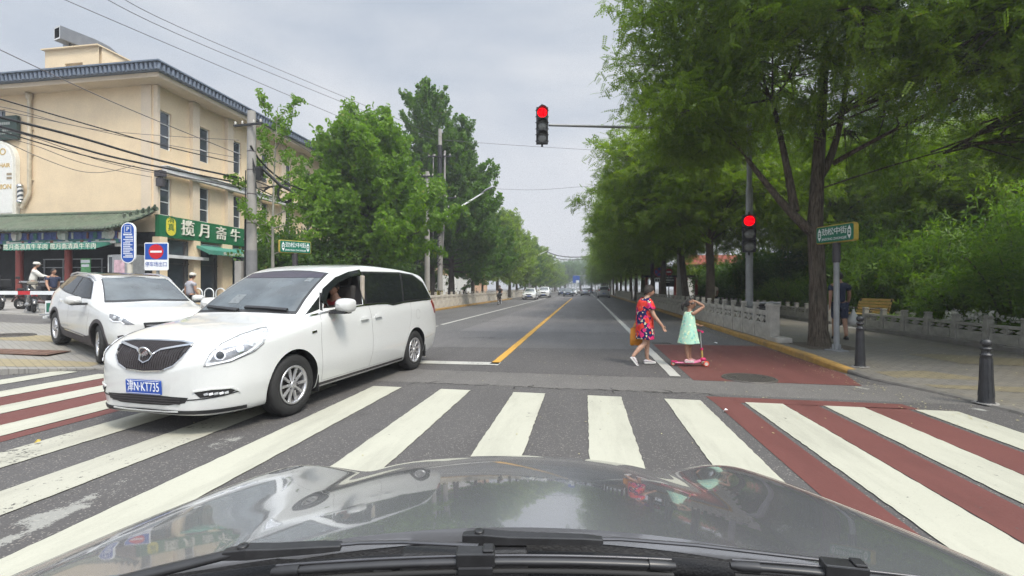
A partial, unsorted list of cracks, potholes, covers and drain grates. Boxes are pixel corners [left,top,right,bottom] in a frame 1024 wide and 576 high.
manhole cover [721,373,778,384]
